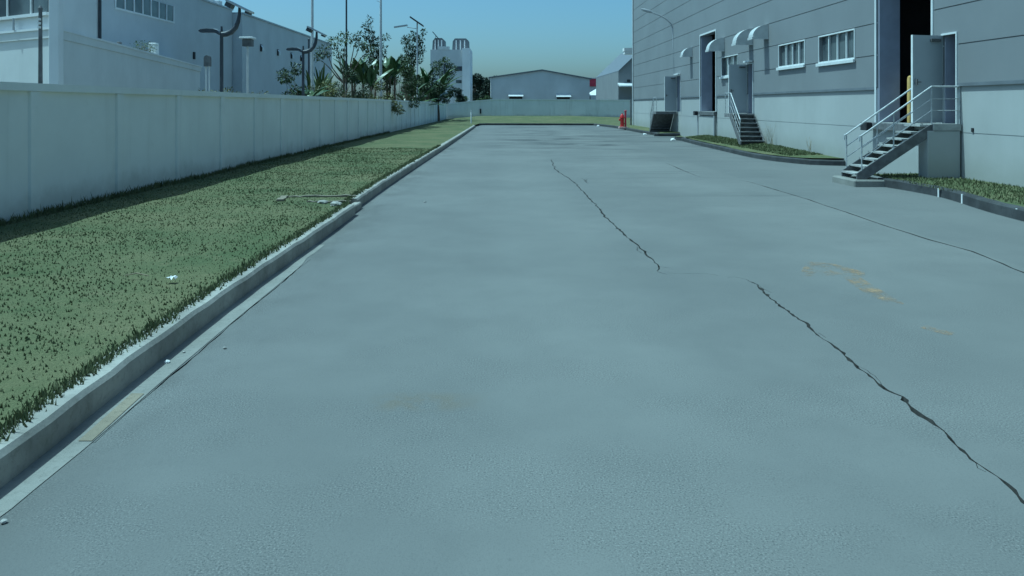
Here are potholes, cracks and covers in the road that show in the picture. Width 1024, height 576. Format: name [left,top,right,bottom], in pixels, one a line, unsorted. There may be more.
crack [746,279,1024,504]
crack [552,164,713,275]
